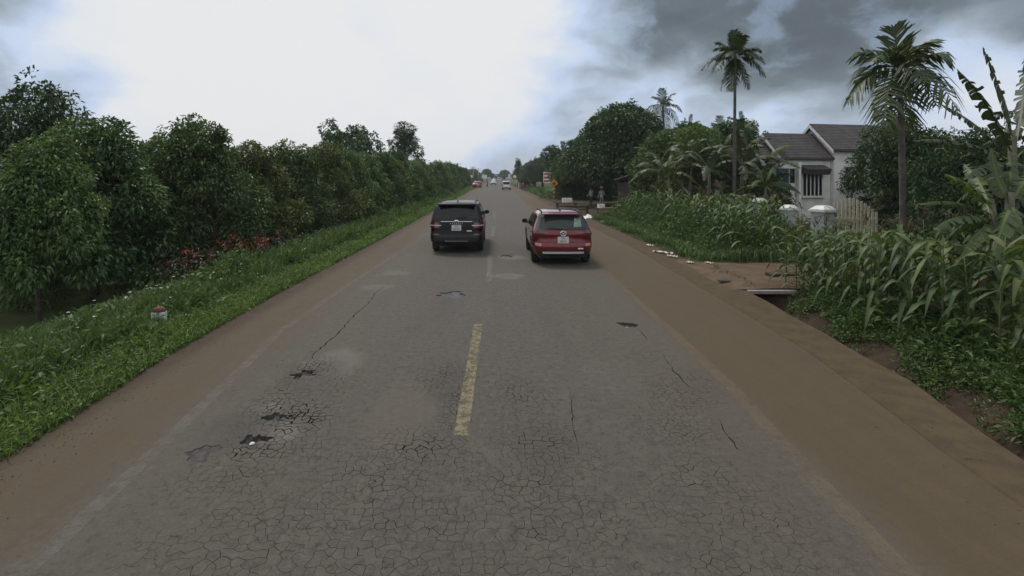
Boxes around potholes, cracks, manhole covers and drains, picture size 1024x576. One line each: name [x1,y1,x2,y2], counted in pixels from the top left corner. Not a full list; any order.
crack [452,377,647,576]
pothole [285,370,316,382]
crack [613,310,839,576]
pothole [261,412,290,423]
pothole [240,434,275,452]
crack [302,293,376,370]
